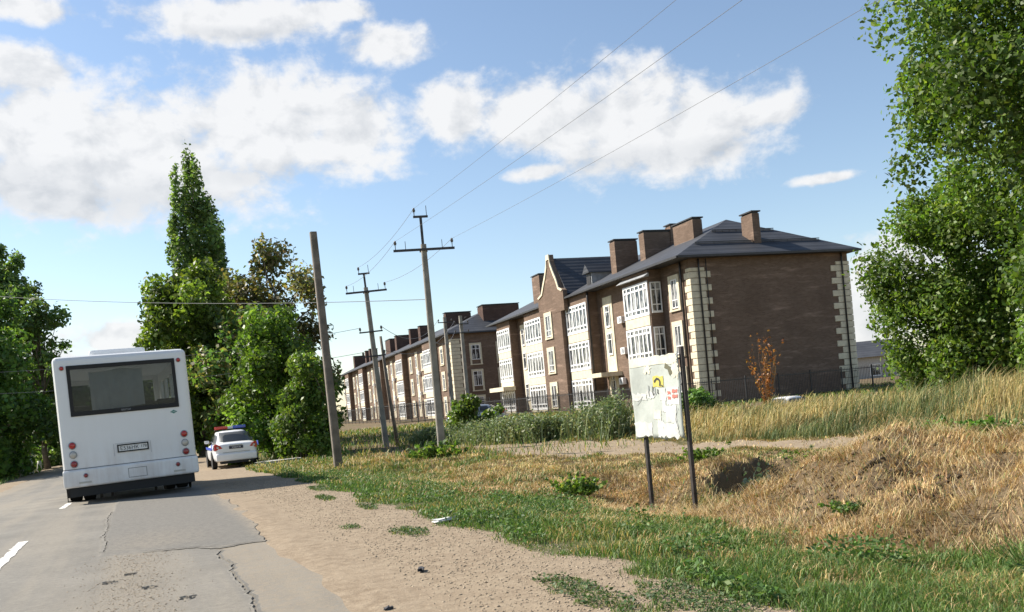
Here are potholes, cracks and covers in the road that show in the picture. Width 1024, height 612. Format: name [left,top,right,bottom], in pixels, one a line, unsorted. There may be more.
crack [145,540,266,612]
crack [99,512,114,553]
